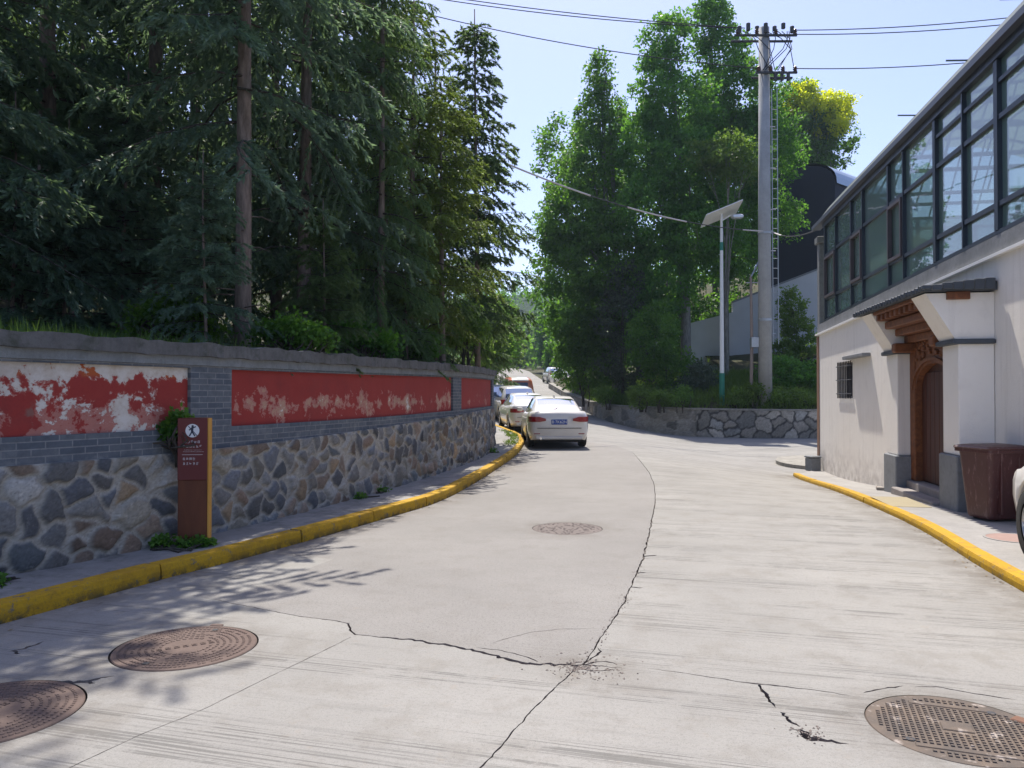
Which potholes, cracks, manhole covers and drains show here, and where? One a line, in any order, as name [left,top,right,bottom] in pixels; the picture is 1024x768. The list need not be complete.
crack [918,686,1009,699]
manhole cover [864,695,1024,768]
crack [657,669,847,744]
manhole cover [108,624,259,672]
manhole cover [0,680,87,743]
crack [70,455,656,768]
manhole cover [982,533,1019,543]
manhole cover [532,523,603,535]
